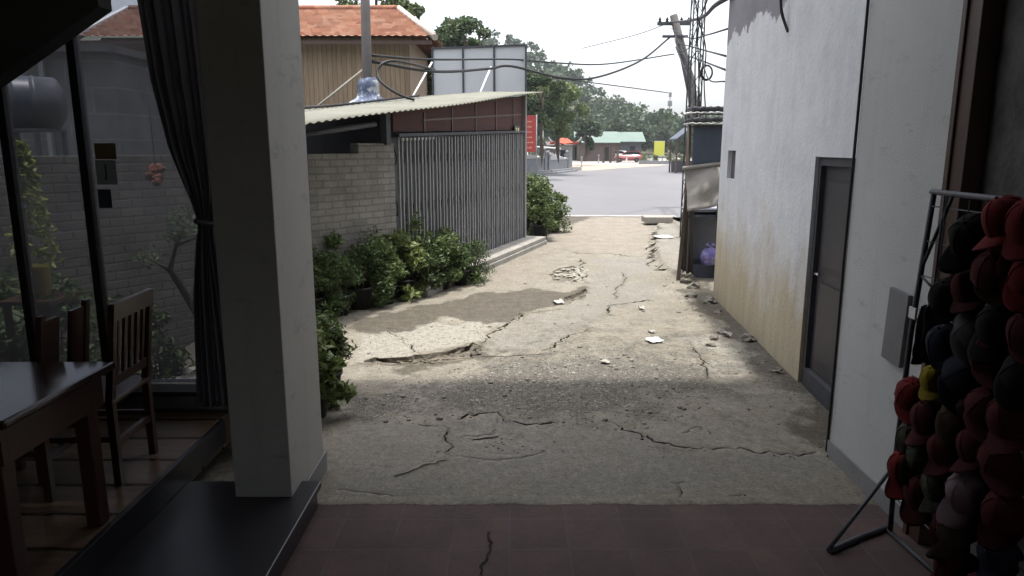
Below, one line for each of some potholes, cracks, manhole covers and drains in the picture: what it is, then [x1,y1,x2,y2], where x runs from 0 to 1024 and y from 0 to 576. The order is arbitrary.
crack [469,226,668,359]
crack [670,480,689,497]
crack [685,339,715,380]
crack [335,411,559,498]
crack [354,330,422,369]
crack [479,532,493,575]
pothole [545,265,592,283]
